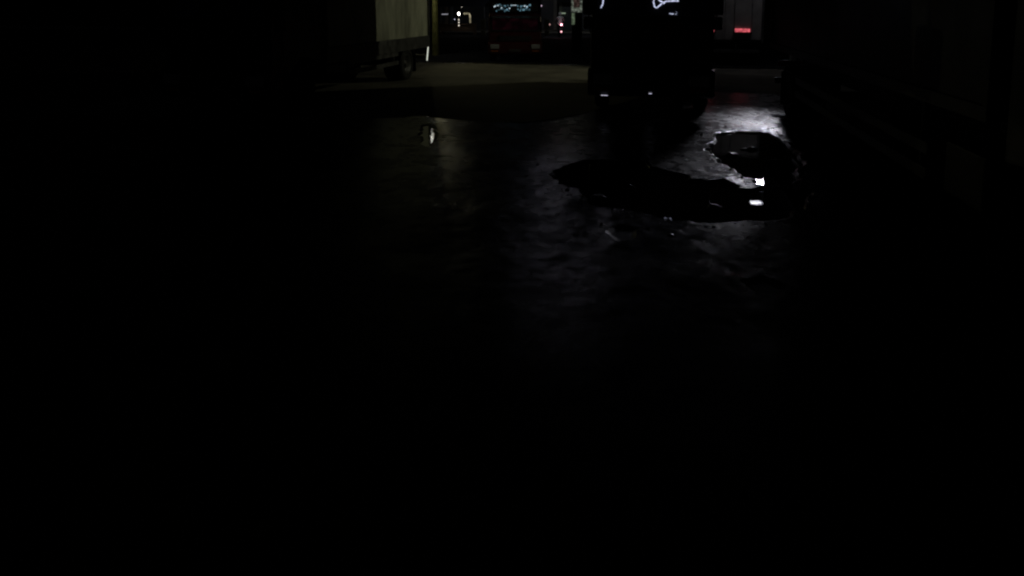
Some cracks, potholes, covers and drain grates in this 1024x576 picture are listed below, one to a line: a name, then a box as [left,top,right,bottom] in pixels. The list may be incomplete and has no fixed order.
pothole [703,131,806,189]
pothole [548,159,814,223]
